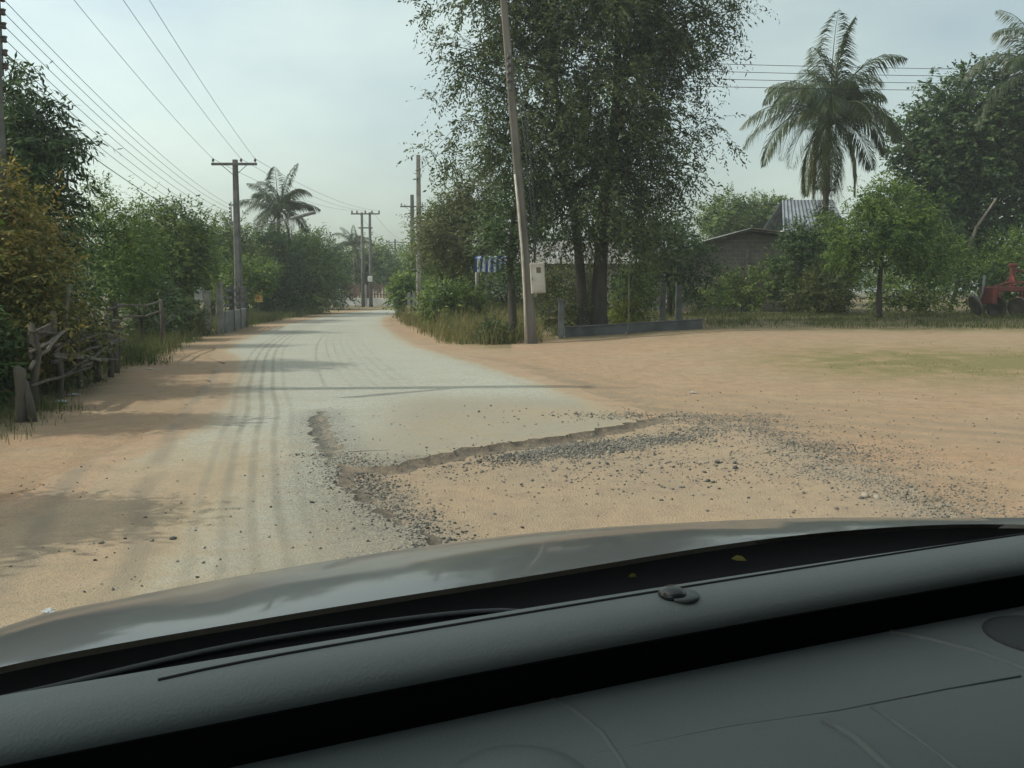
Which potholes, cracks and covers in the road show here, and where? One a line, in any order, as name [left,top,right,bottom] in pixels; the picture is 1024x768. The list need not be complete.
pothole [335,417,966,545]
pothole [306,411,347,458]
